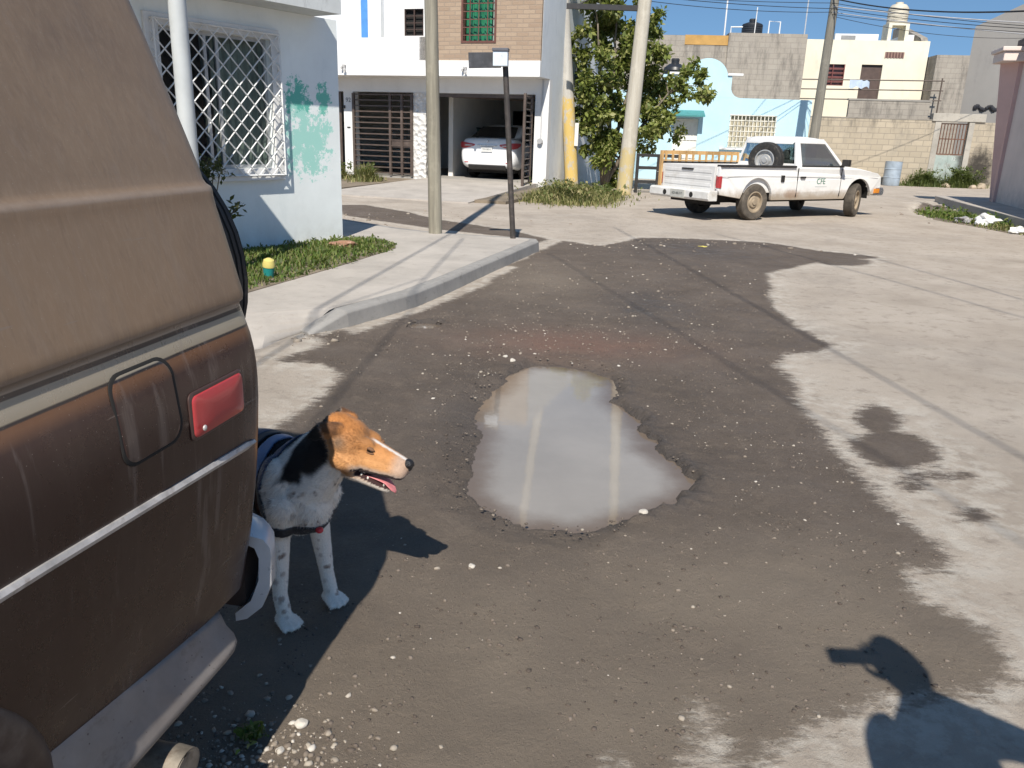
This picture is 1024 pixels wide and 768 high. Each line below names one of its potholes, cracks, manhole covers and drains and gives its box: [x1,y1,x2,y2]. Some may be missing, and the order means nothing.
pothole [417,354,742,555]
